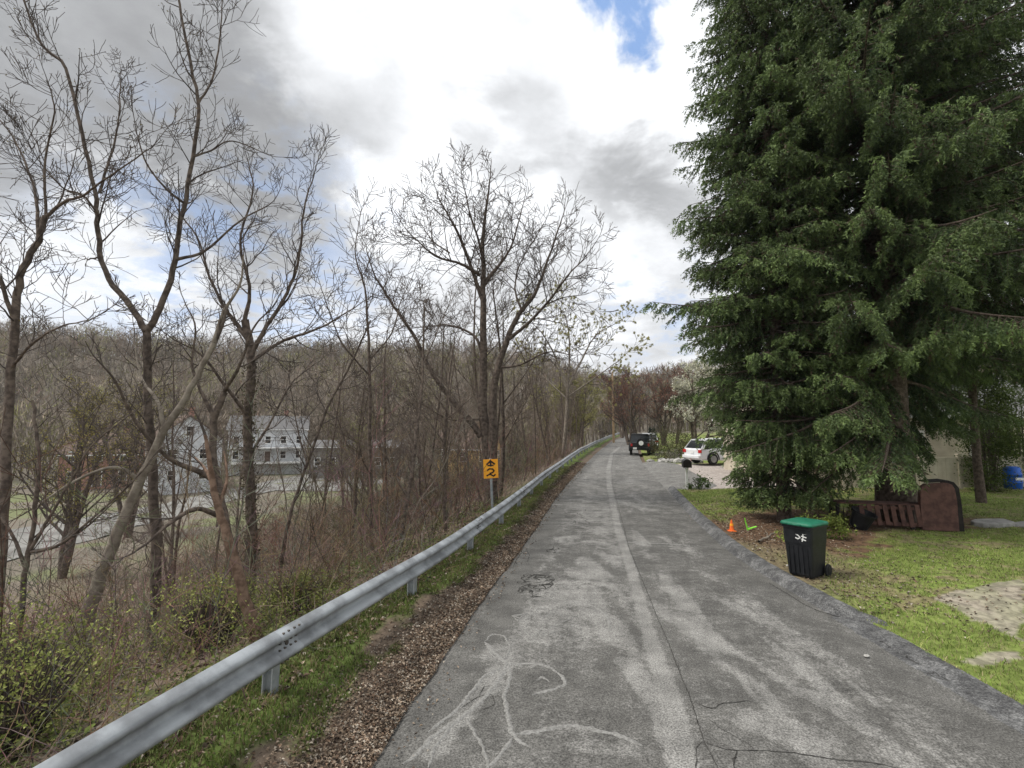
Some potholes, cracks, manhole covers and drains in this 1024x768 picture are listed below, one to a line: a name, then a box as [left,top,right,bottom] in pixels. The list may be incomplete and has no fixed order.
crack [551,455,895,768]
